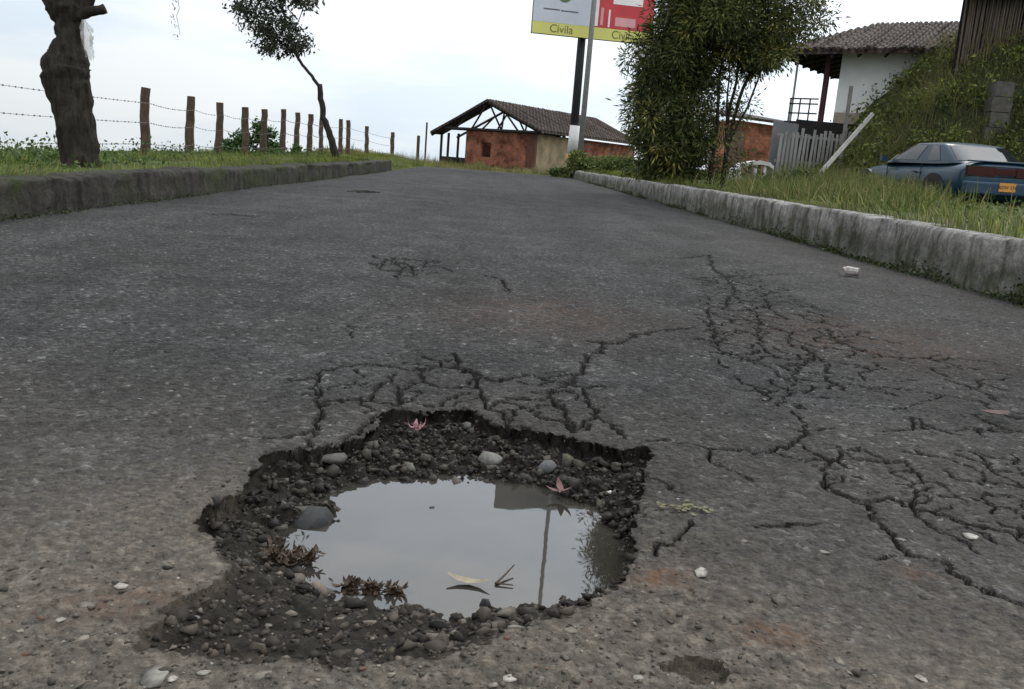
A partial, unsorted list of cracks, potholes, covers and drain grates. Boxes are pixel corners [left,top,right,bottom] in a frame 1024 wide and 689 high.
pothole [651,654,729,685]
crack [666,255,880,410]
crack [372,256,455,278]
crack [652,411,1024,607]
pothole [133,409,654,671]
crack [267,328,688,461]
crack [816,326,1021,436]
